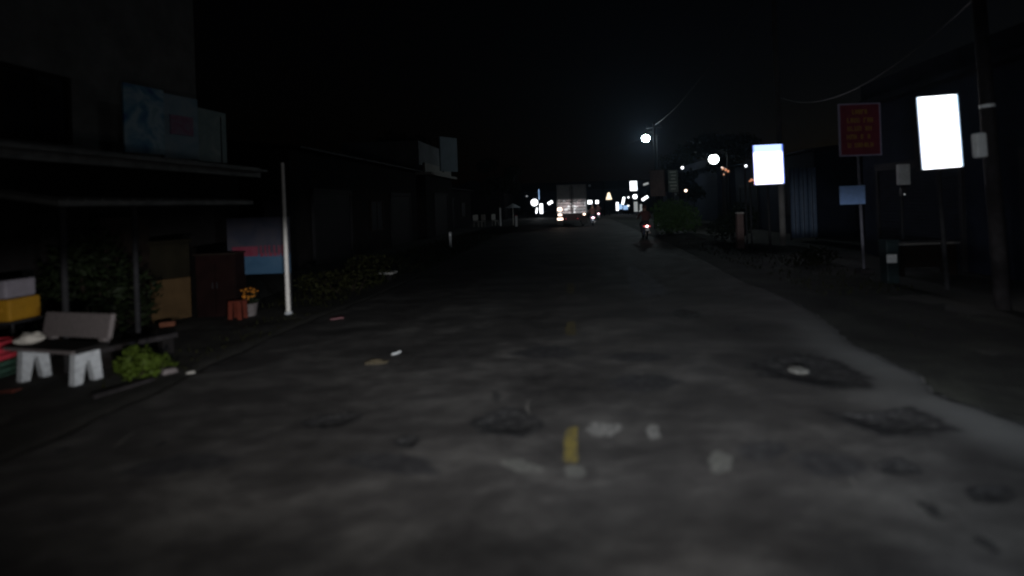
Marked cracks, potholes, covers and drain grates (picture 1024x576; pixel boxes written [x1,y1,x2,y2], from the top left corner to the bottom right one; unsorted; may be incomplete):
pothole [737,350,884,393]
pothole [960,483,1020,505]
pothole [392,433,422,449]
pothole [296,410,368,431]
pothole [869,455,928,477]
pothole [463,405,551,440]
pothole [814,404,972,440]
